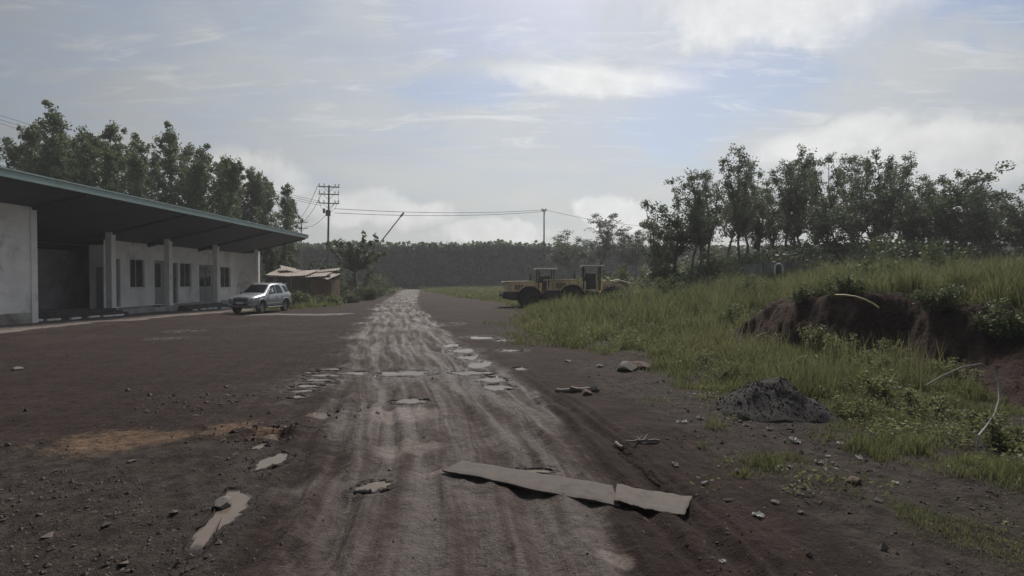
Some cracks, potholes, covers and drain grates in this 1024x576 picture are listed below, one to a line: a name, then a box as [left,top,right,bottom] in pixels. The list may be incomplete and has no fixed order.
pothole [478,382,520,392]
pothole [463,360,498,369]
pothole [179,483,259,559]
pothole [472,375,513,383]
pothole [363,369,439,378]
pothole [349,478,398,495]
pothole [247,449,295,474]
pothole [386,396,435,405]
pothole [248,440,273,450]
